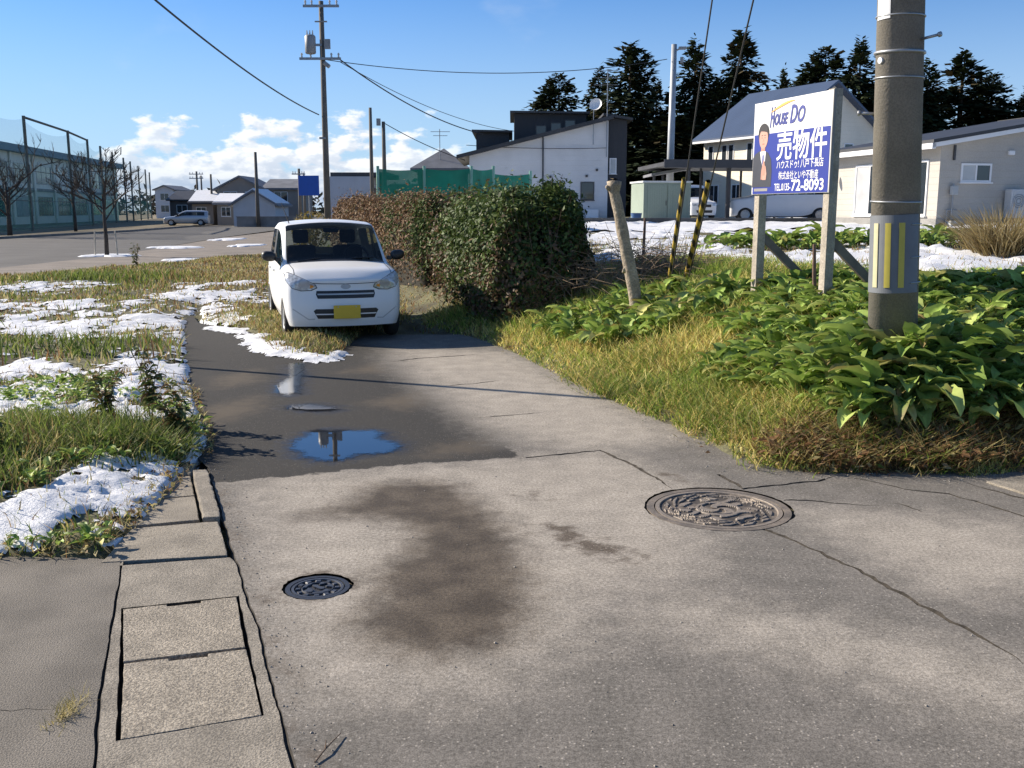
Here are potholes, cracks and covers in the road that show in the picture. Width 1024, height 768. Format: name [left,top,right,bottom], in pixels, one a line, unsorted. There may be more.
crack [719,474,1024,664]
manhole cover [282,576,353,600]
manhole cover [644,489,795,532]
